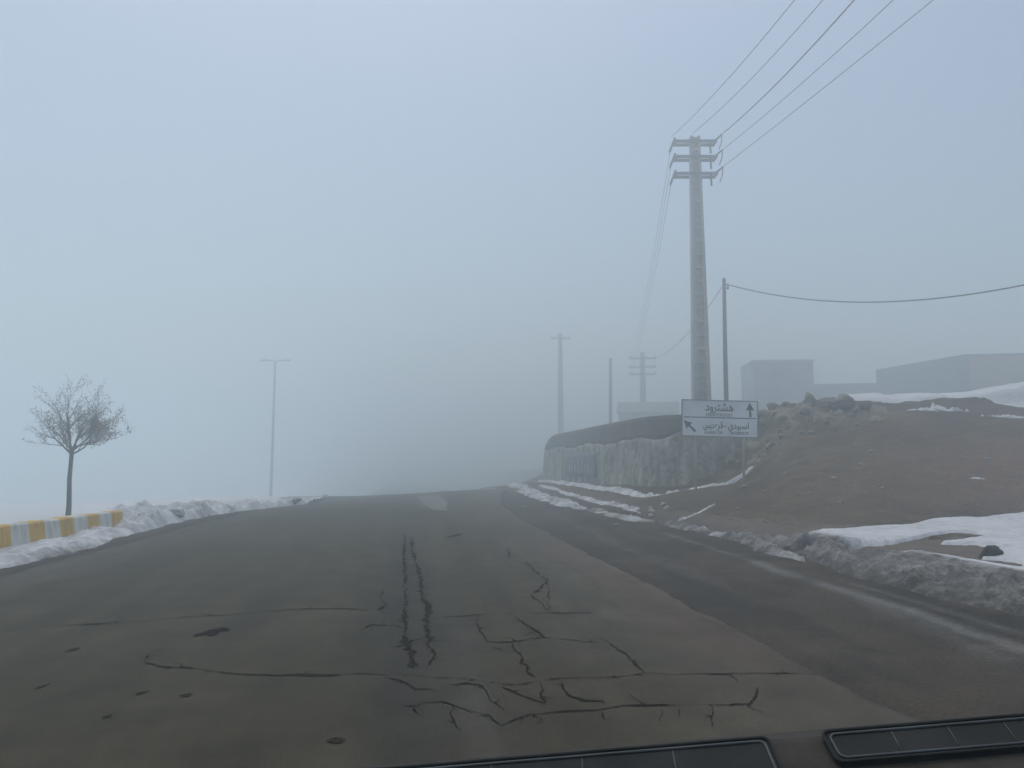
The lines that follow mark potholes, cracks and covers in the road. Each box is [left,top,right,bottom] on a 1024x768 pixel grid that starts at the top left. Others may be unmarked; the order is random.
pothole [193,627,229,636]
crack [1,533,817,729]
